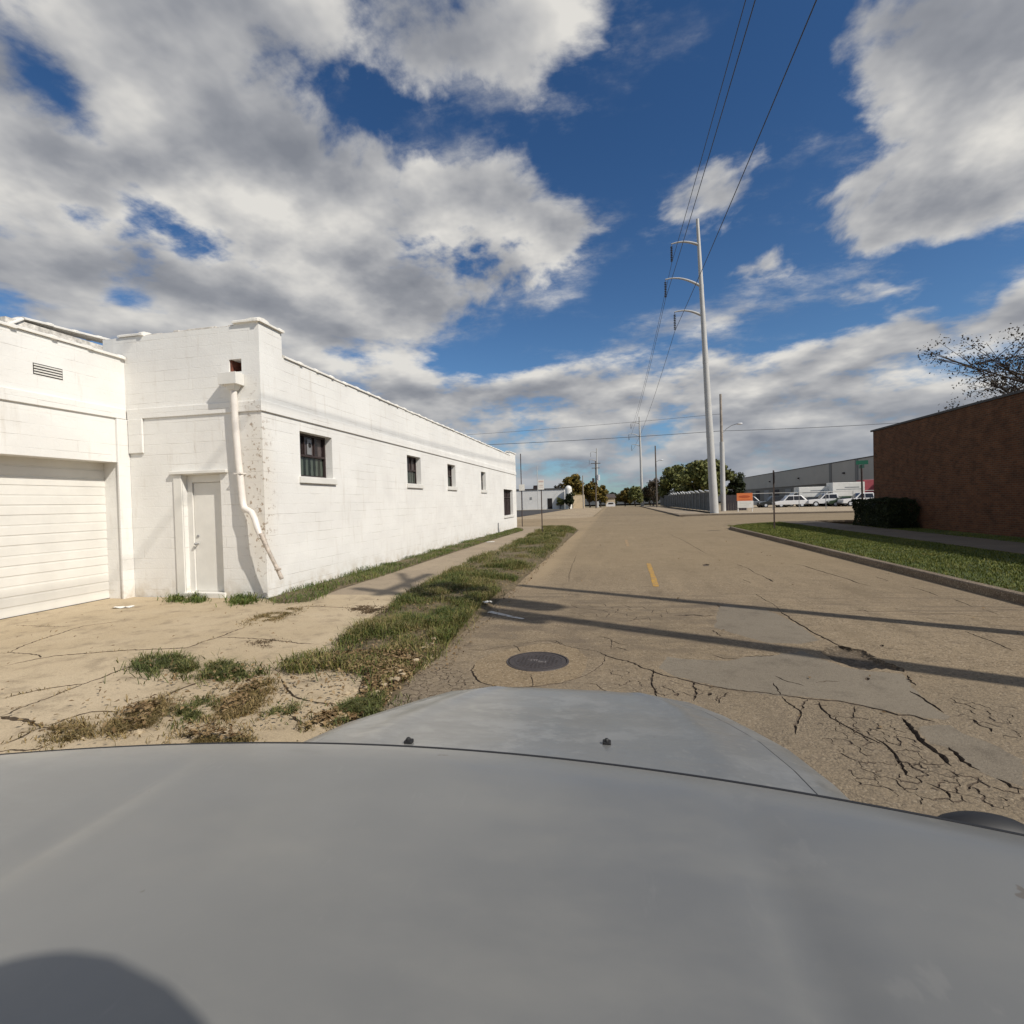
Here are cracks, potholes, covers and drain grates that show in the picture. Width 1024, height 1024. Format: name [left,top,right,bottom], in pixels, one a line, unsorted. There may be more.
manhole cover [506,652,569,672]
pothole [821,645,905,672]
crack [727,565,854,650]
crack [386,636,1024,810]
